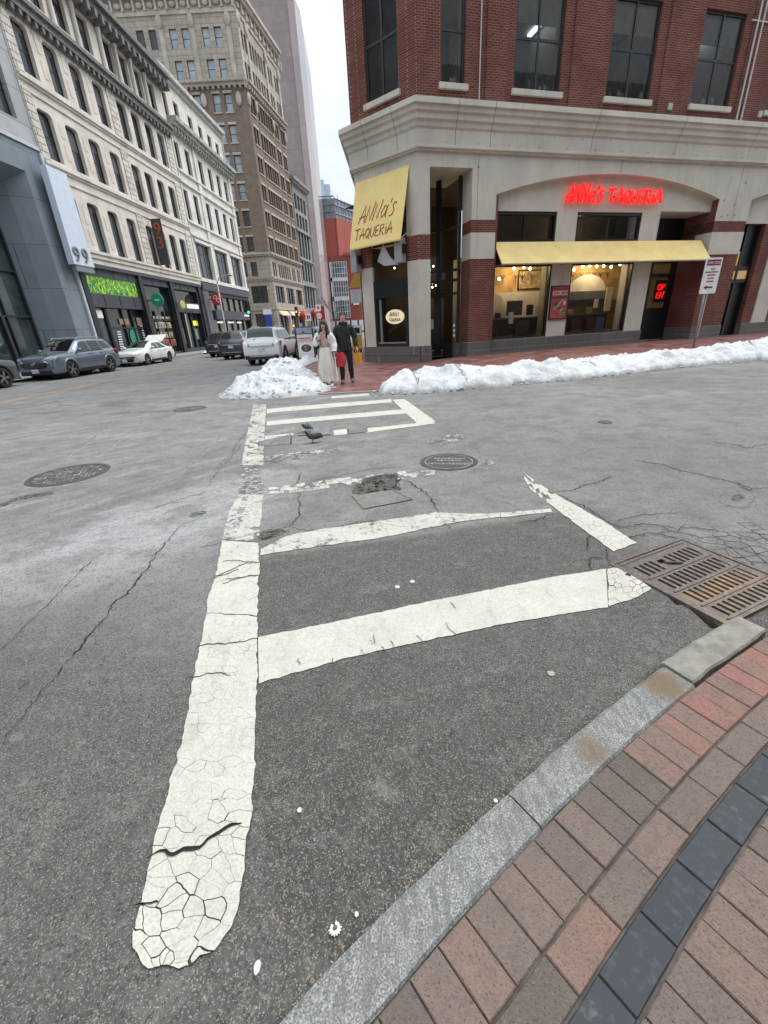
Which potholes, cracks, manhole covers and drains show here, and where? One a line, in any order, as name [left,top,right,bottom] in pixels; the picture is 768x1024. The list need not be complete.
manhole cover [418,453,482,472]
manhole cover [22,463,112,489]
crack [0,410,496,743]
drain grate [609,537,768,629]
pothole [345,472,410,496]
crack [134,624,258,969]
crack [713,441,768,449]
crack [515,476,768,592]
crack [635,460,768,491]
